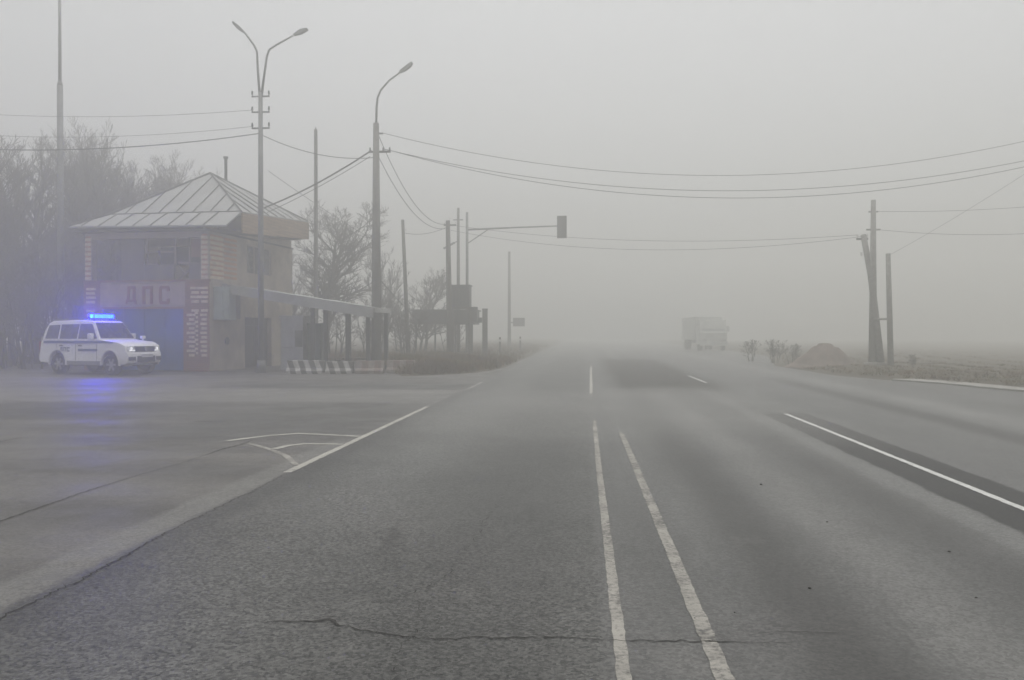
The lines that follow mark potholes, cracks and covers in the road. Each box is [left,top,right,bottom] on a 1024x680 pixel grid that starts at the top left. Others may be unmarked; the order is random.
crack [267,490,836,680]
